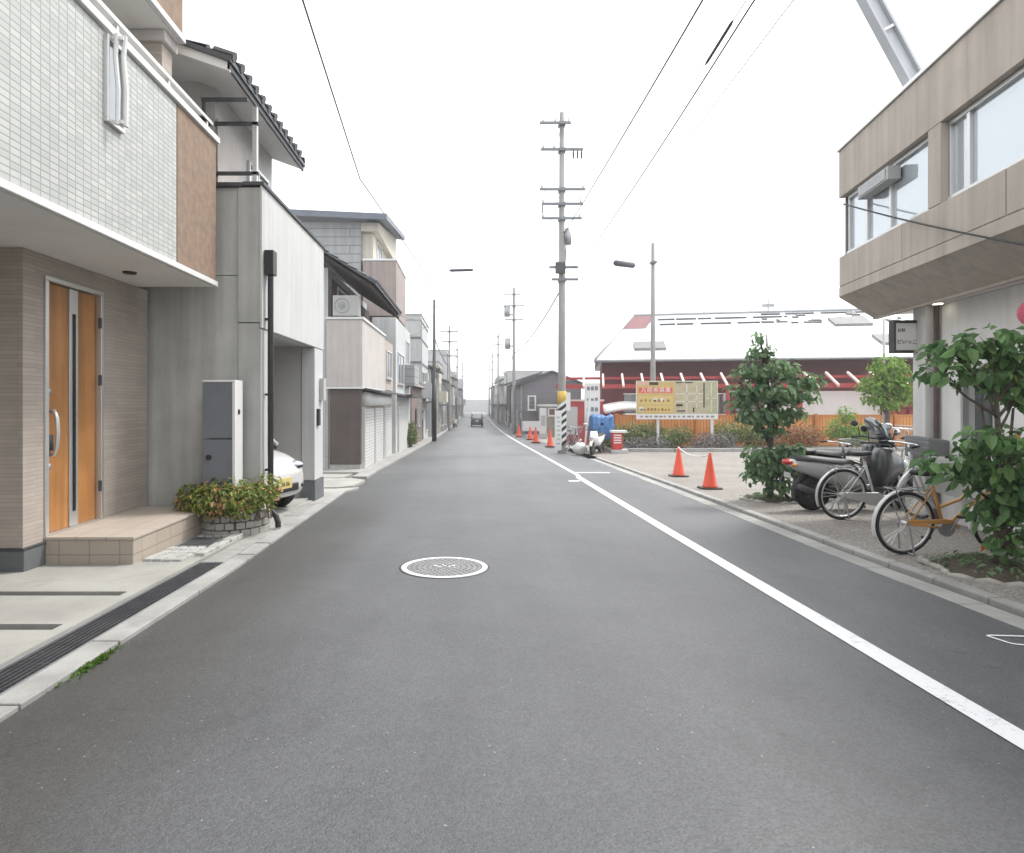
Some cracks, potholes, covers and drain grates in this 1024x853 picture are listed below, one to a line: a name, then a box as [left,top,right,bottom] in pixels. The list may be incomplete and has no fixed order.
drain grate [0,562,225,695]
manhole cover [399,557,490,579]
